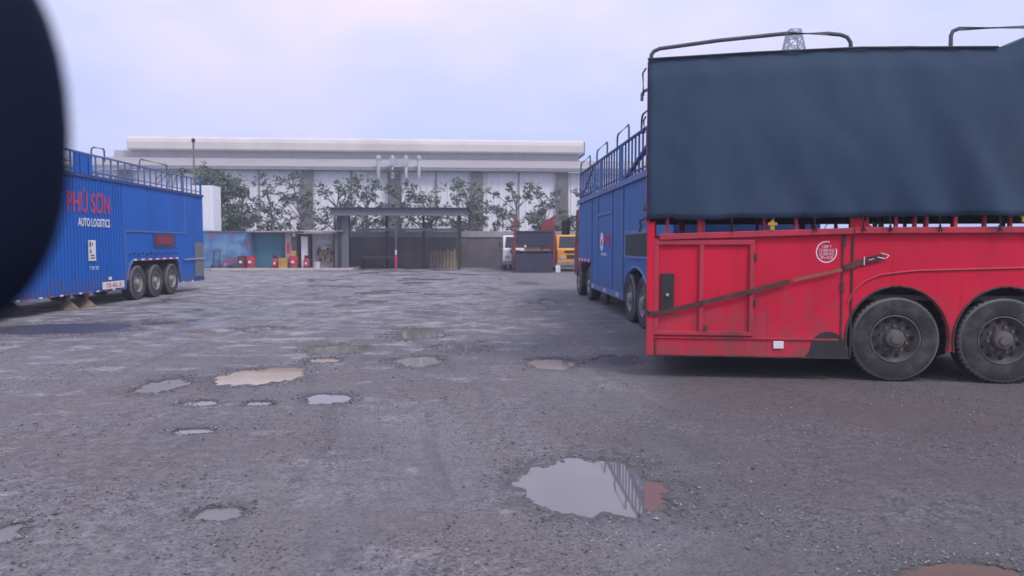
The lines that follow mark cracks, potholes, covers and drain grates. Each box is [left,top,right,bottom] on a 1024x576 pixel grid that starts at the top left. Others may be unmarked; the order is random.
pothole [889,559,1024,576]
pothole [210,366,308,386]
pothole [0,322,139,335]
pothole [525,358,576,370]
pothole [0,522,25,543]
pothole [305,393,354,404]
pothole [391,355,443,367]
pothole [507,456,674,521]
pothole [192,505,248,521]
pothole [126,376,195,394]
pothole [391,328,445,339]
pothole [590,355,639,365]
